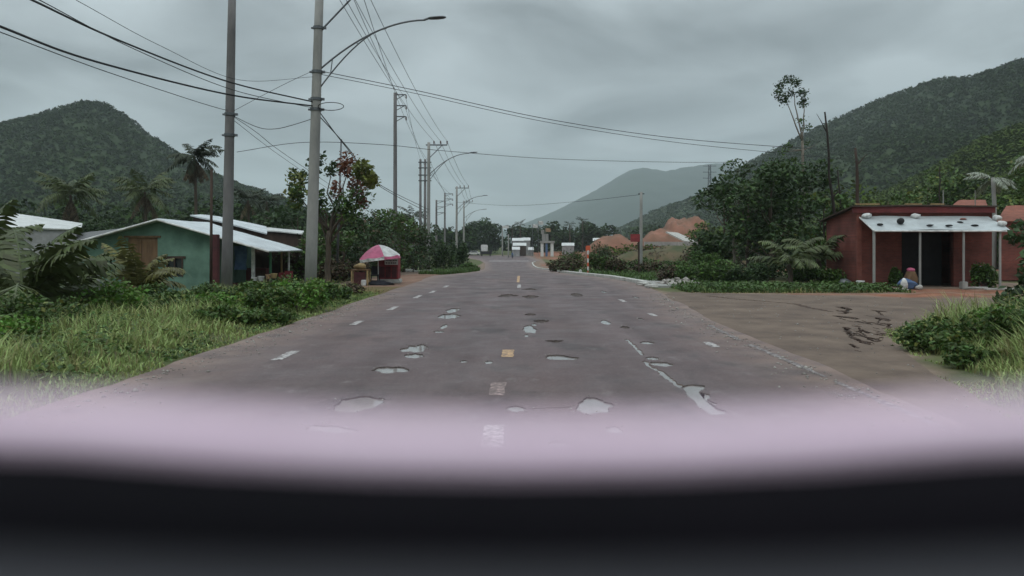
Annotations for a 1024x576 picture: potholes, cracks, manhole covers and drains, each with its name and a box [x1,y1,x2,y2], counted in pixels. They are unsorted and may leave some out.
pothole [400,344,428,352]
pothole [334,396,385,412]
crack [710,296,892,352]
pothole [682,384,726,415]
pothole [576,397,614,414]
